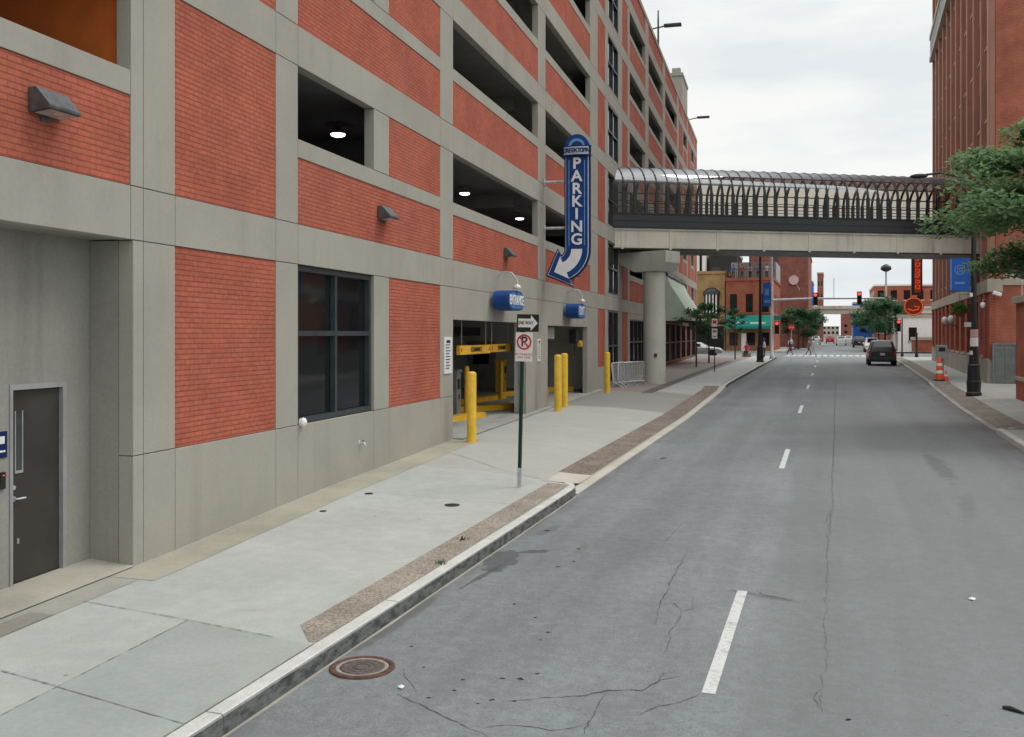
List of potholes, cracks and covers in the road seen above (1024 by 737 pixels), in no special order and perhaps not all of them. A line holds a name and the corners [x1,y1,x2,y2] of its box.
manhole cover [329,656,395,680]
crack [400,669,699,737]
crack [656,522,694,652]
crack [814,372,836,713]
